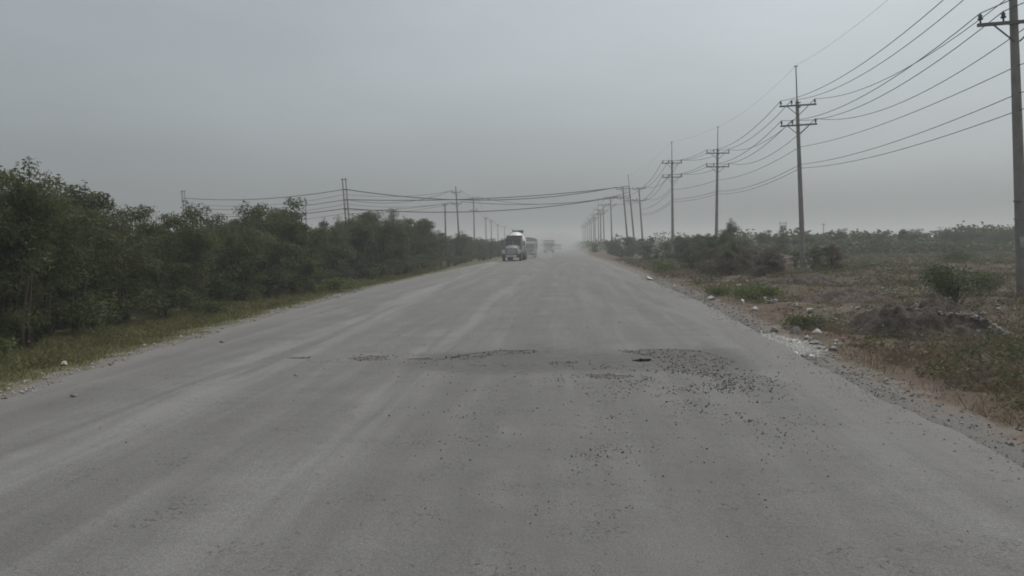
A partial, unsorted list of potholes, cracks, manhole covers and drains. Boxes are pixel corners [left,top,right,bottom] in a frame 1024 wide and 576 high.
pothole [431,349,539,361]
pothole [618,348,735,371]
